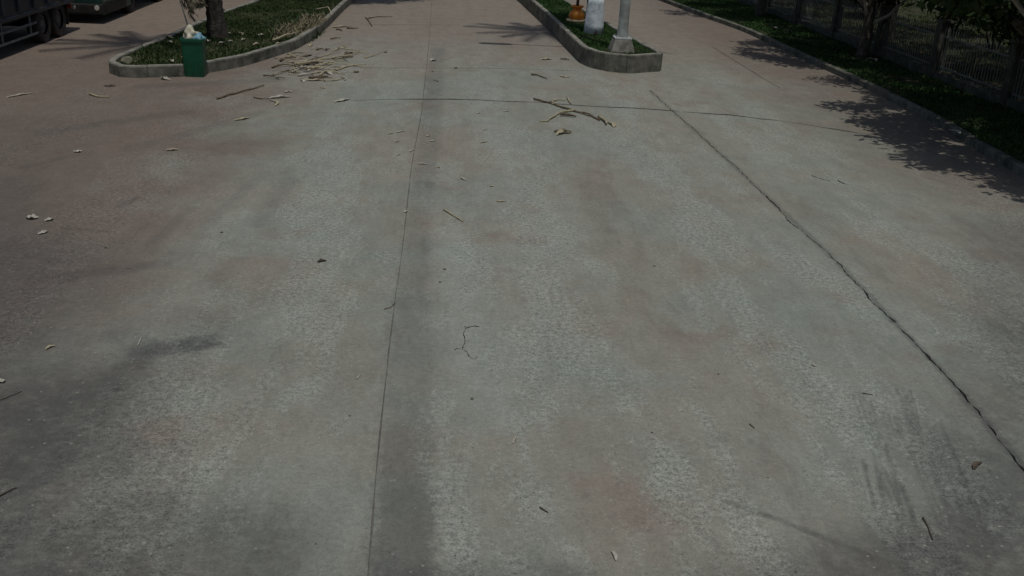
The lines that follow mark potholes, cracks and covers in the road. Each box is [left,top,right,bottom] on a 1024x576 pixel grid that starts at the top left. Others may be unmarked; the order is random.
crack [355,96,1024,472]
